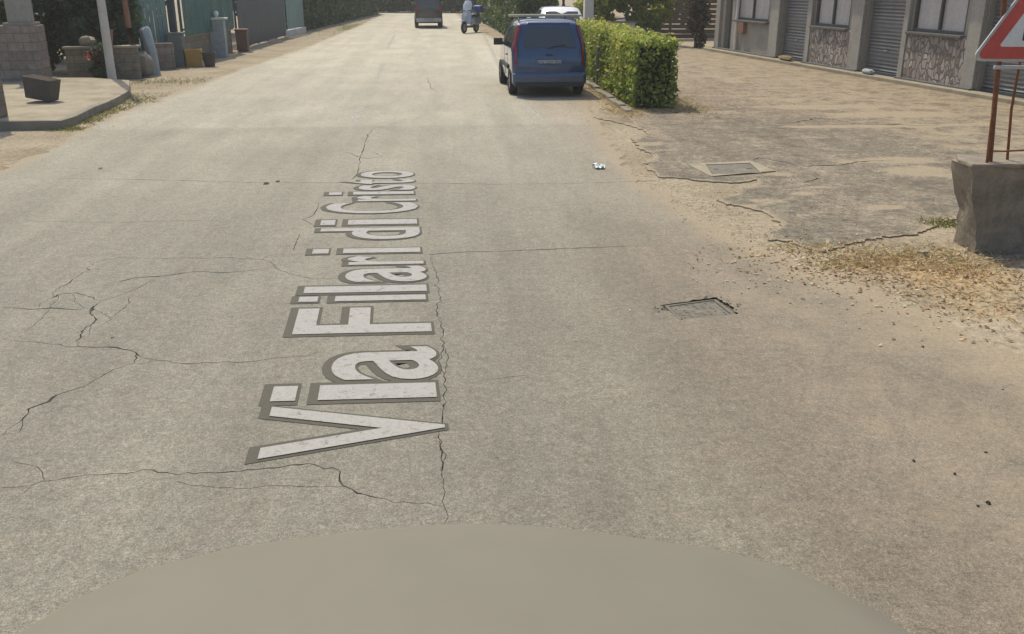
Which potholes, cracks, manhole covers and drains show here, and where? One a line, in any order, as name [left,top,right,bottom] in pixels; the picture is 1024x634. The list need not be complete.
manhole cover [653,296,741,320]
crack [431,256,449,522]
manhole cover [688,161,779,177]
crack [3,461,439,506]
crack [336,128,383,183]
crack [4,258,317,434]
